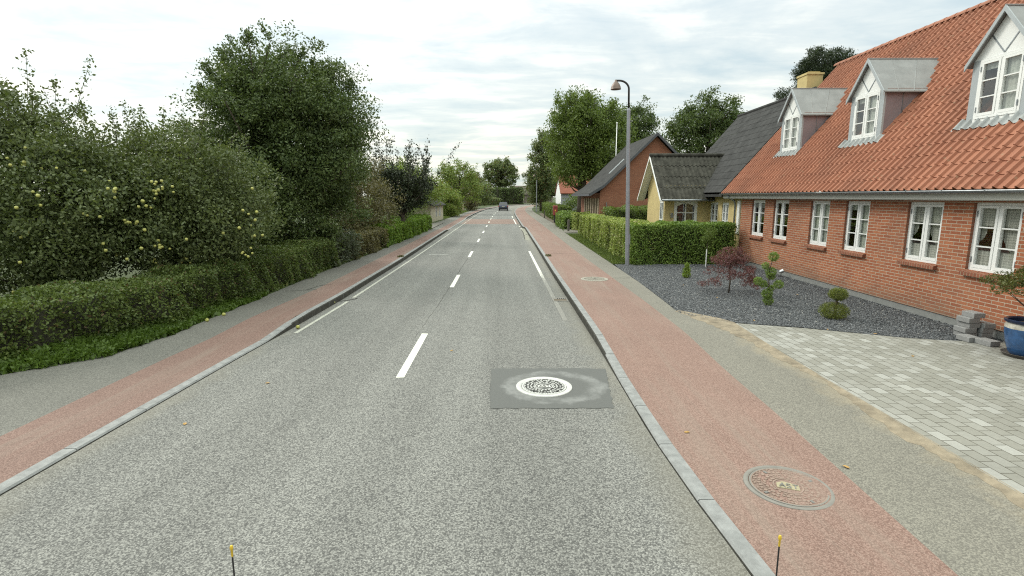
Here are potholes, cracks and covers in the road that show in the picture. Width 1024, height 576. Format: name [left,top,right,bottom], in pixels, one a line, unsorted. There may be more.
manhole cover [743,465,835,510]
manhole cover [516,377,572,397]
